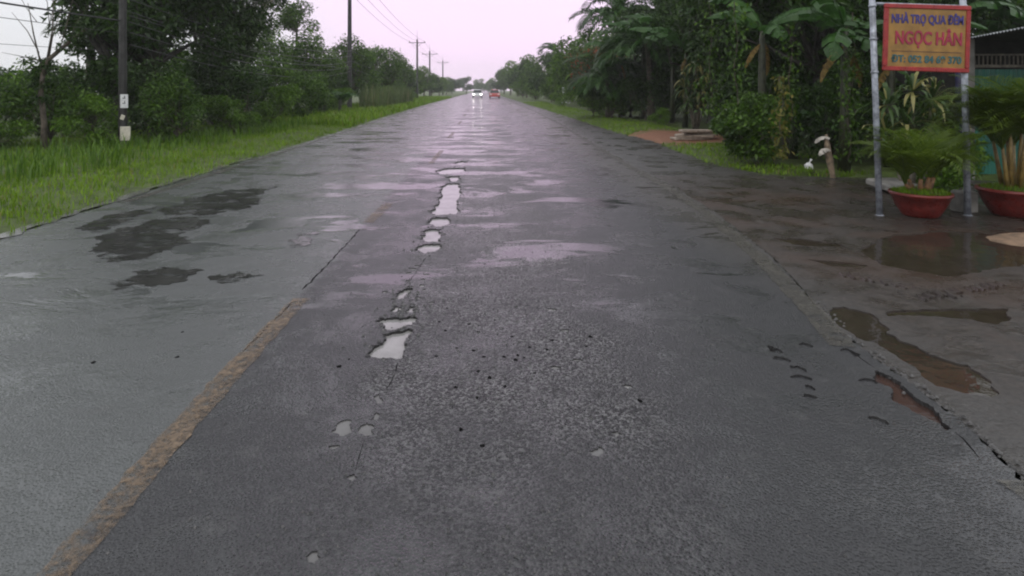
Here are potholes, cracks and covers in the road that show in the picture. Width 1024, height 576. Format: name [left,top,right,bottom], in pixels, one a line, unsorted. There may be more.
pothole [365,328,413,359]
pothole [414,243,442,254]
pothole [430,183,462,215]
pothole [358,423,375,436]
pothole [873,370,952,430]
pothole [419,228,442,242]
pothole [331,419,352,436]
pothole [375,314,418,330]
pothole [428,216,452,227]
